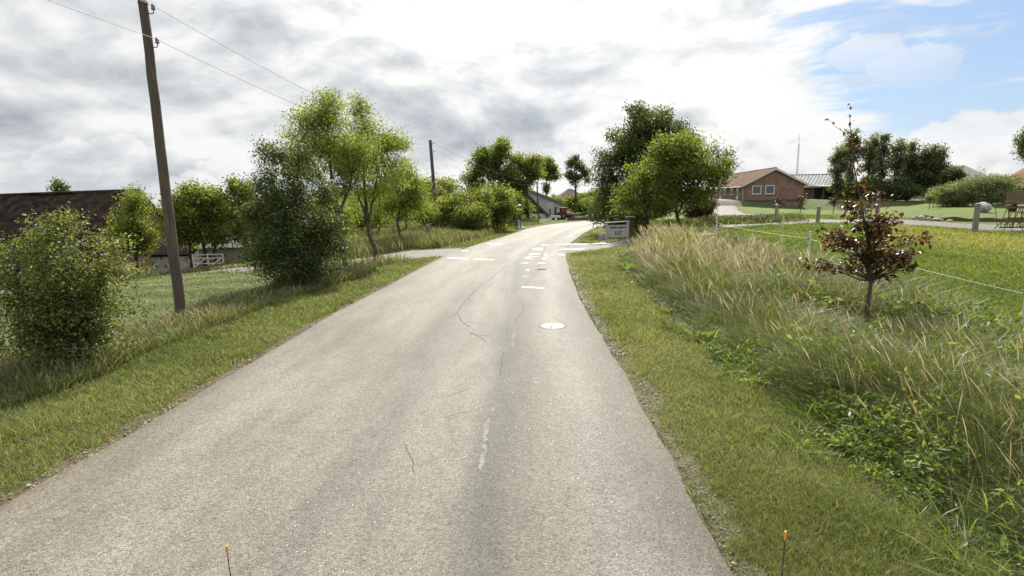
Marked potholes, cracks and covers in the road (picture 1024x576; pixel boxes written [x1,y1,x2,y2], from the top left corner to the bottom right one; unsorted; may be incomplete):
crack [453,268,503,341]
